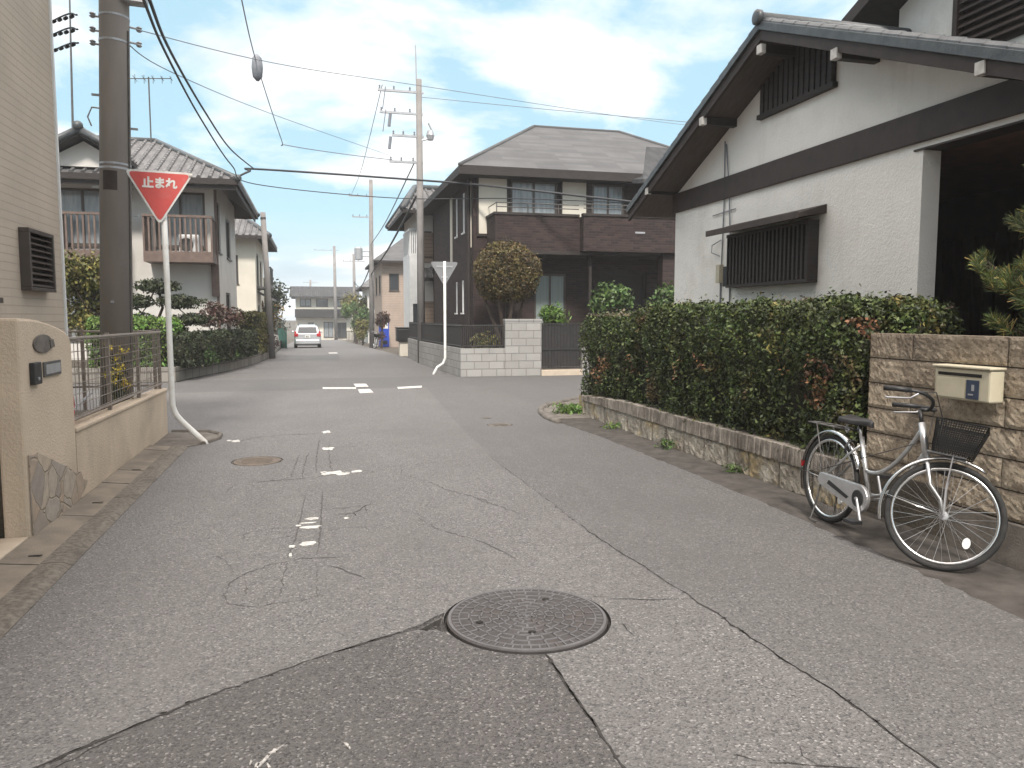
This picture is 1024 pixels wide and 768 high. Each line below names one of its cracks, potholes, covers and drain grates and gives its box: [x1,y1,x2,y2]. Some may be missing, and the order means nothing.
manhole cover [231,456,283,466]
crack [203,430,518,607]
crack [500,464,940,768]
manhole cover [443,588,611,655]
